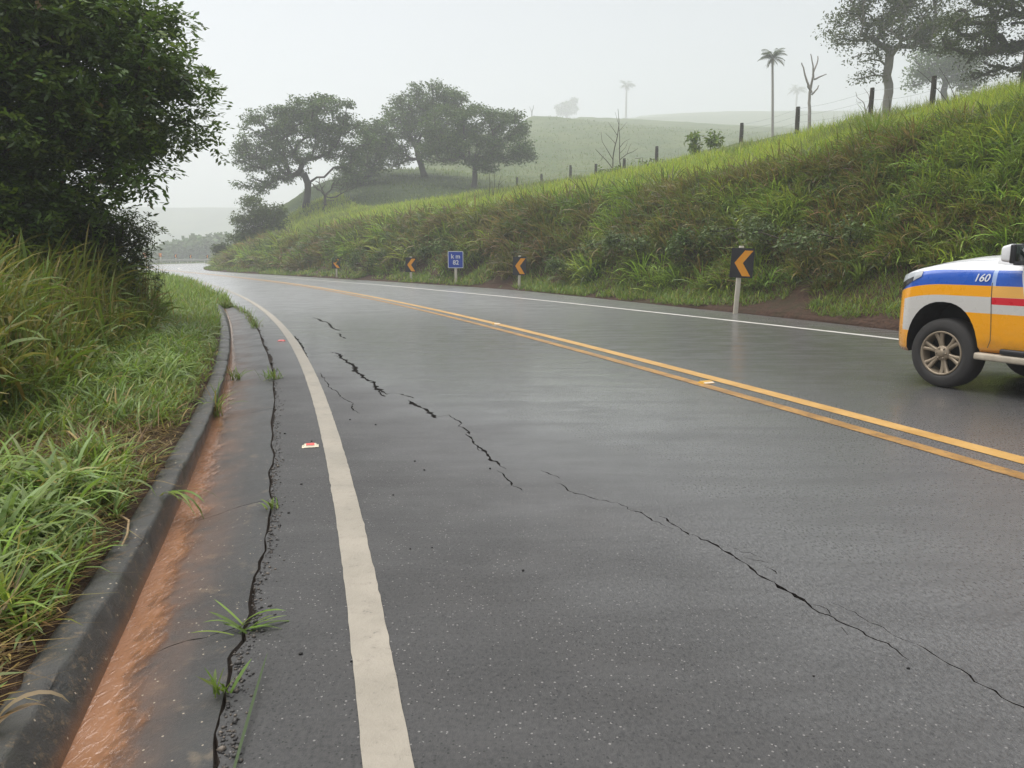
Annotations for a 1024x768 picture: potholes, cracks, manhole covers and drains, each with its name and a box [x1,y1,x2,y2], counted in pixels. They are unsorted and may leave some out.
crack [150,312,276,768]
crack [294,318,1024,708]
